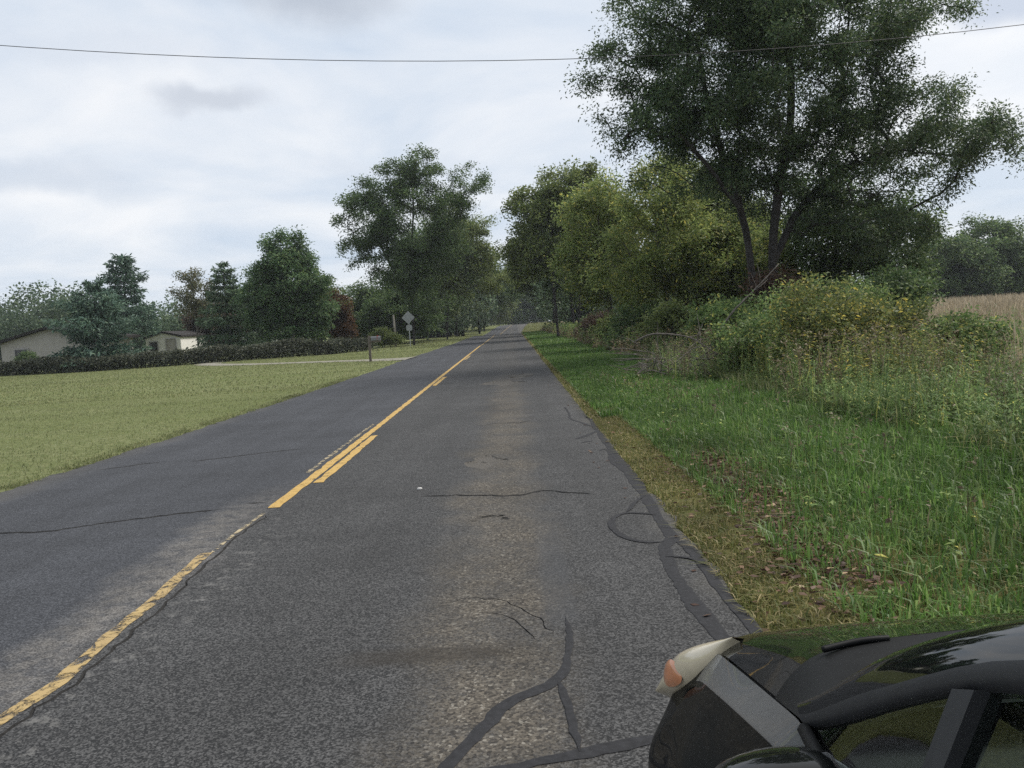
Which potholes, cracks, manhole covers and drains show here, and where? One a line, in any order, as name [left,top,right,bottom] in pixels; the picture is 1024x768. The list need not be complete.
crack [442,597,554,639]
crack [198,449,298,461]
